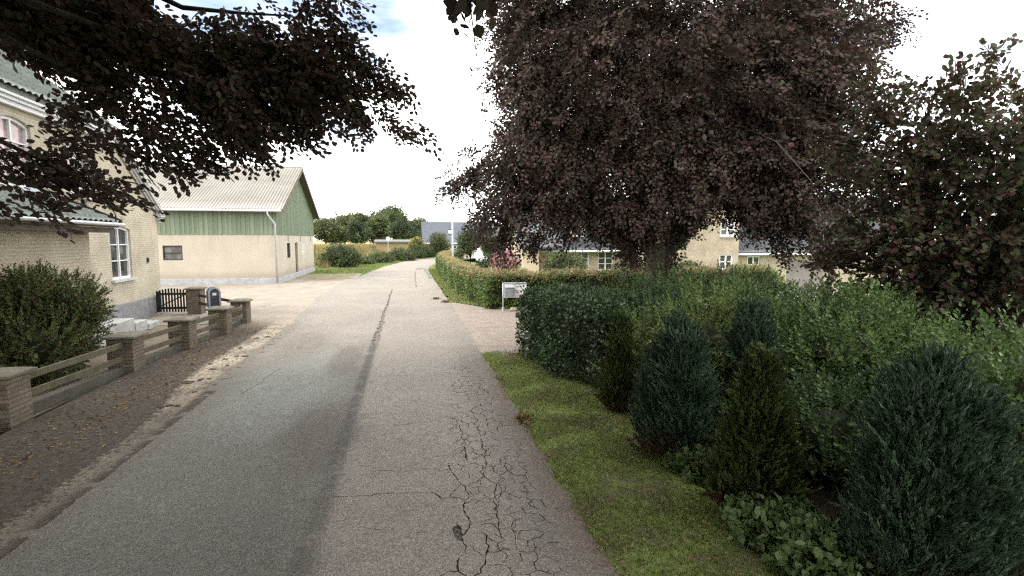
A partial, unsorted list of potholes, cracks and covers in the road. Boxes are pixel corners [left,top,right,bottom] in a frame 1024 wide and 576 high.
crack [337,367,562,576]
